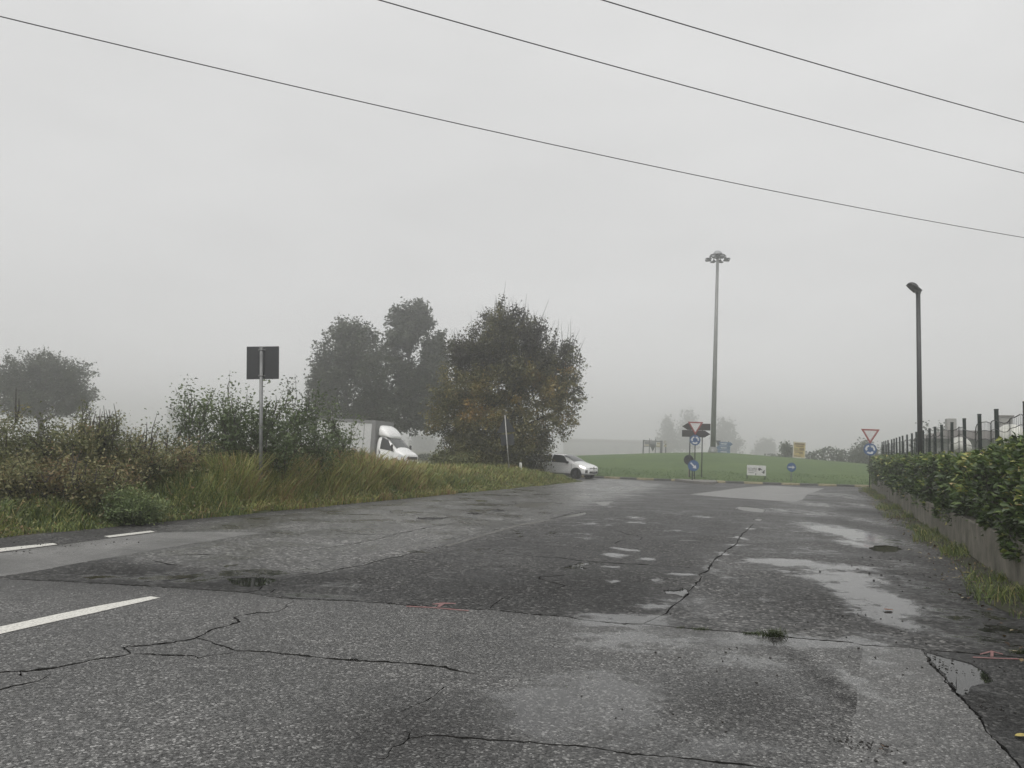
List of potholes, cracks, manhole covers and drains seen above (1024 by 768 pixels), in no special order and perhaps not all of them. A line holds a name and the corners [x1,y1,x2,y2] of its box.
pothole [925,651,994,695]
crack [496,524,753,623]
crack [924,652,1022,768]
crack [0,586,480,713]
pothole [227,577,277,587]
crack [381,731,771,768]
